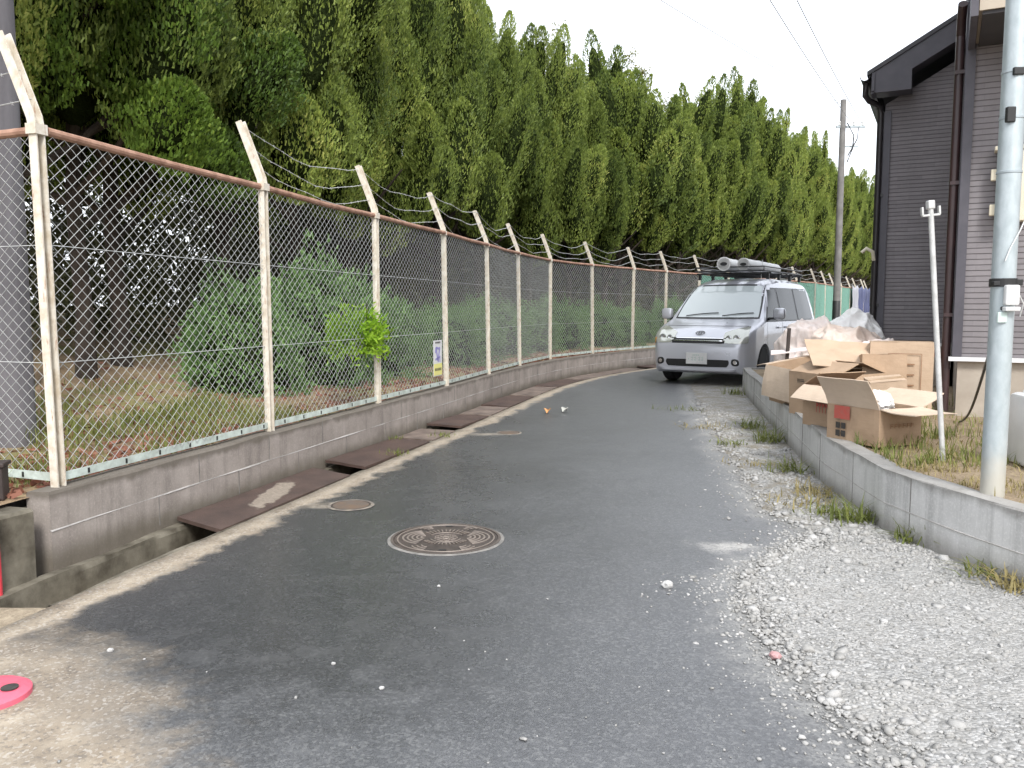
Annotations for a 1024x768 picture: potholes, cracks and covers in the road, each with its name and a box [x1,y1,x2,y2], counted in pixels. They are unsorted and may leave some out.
manhole cover [327,499,375,511]
manhole cover [387,523,504,556]
